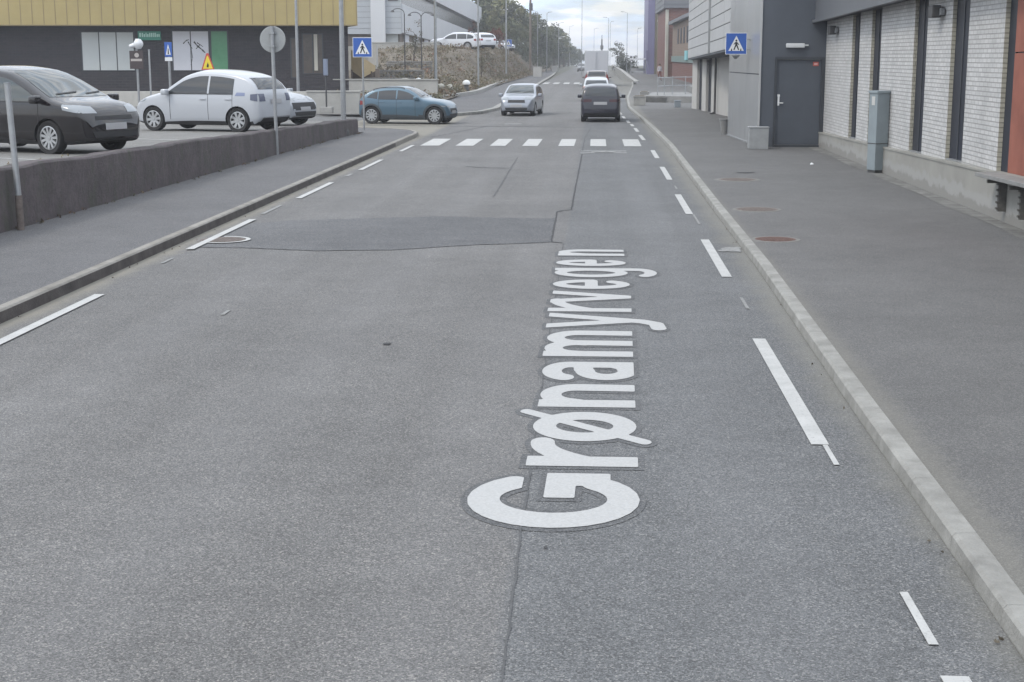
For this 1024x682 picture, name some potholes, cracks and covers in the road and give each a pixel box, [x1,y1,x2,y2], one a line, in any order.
crack [214,125,590,682]
